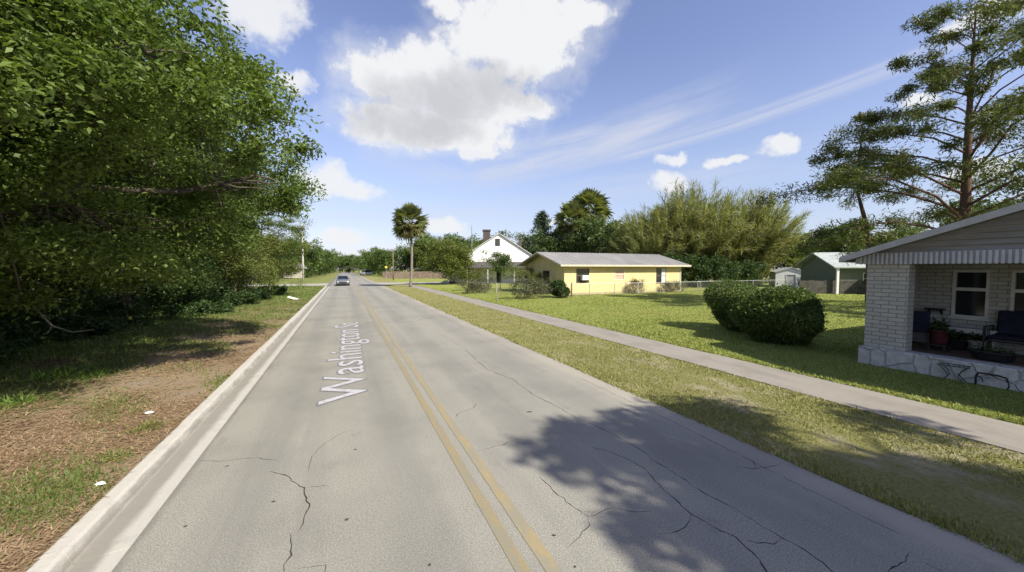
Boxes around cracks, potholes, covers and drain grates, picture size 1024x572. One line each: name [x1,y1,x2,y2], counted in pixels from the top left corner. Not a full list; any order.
crack [469,353,833,572]
crack [587,381,903,536]
crack [202,435,338,572]
